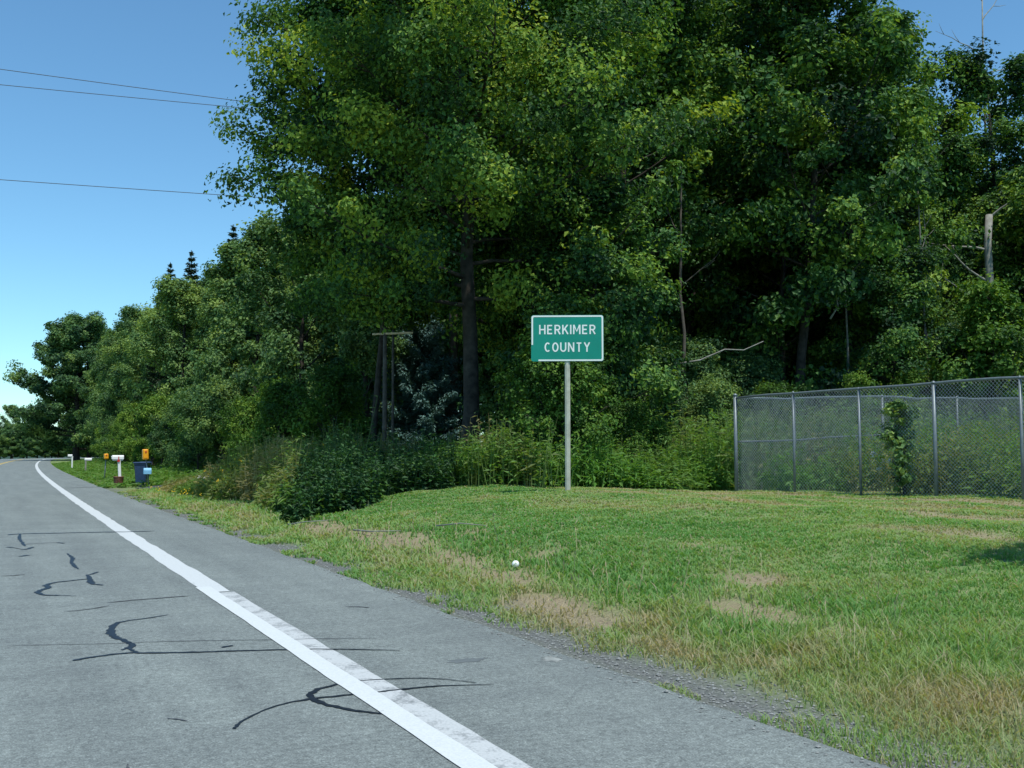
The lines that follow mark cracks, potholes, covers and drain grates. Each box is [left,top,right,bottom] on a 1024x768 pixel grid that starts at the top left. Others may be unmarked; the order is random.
crack [38,638,321,647]
crack [73,596,182,611]
crack [8,531,145,556]
